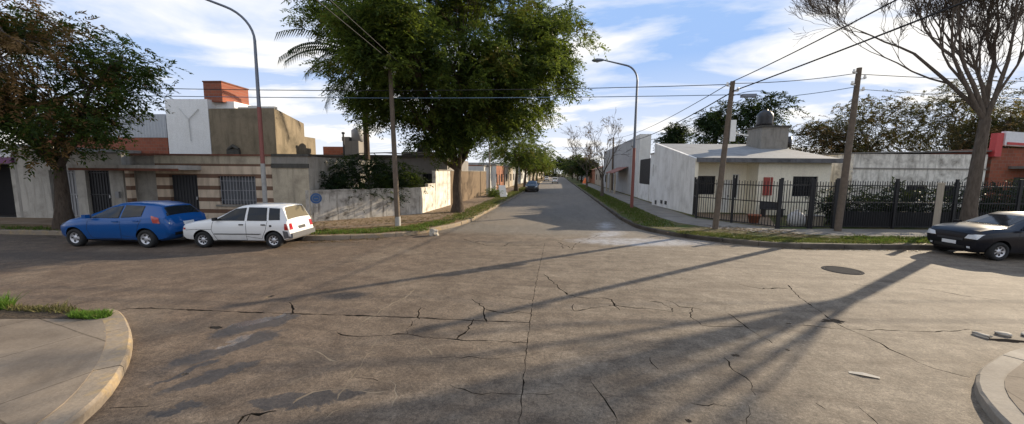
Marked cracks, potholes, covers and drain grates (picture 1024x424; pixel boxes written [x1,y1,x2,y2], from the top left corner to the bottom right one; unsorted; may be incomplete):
manhole cover [821,266,865,275]
crack [237,410,276,424]
crack [692,358,754,424]
crack [280,288,526,418]
crack [748,285,981,378]
crack [544,274,772,343]
